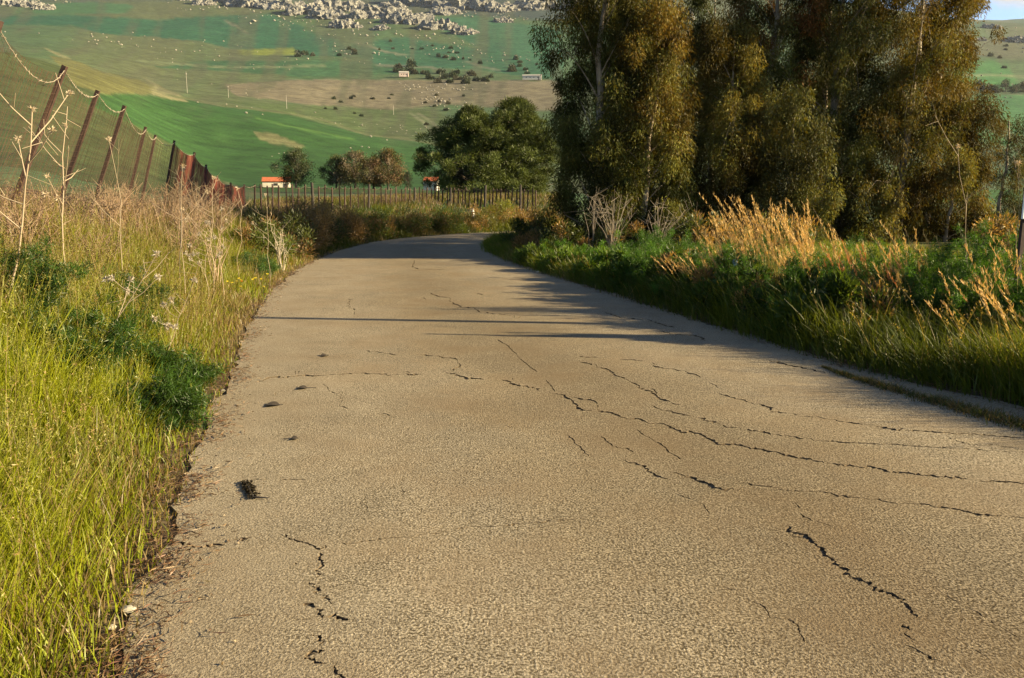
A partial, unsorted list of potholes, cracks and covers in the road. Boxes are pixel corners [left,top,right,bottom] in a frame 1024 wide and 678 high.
crack [257,350,481,409]
crack [747,482,1023,660]
crack [285,519,572,678]
crack [498,340,1024,512]
